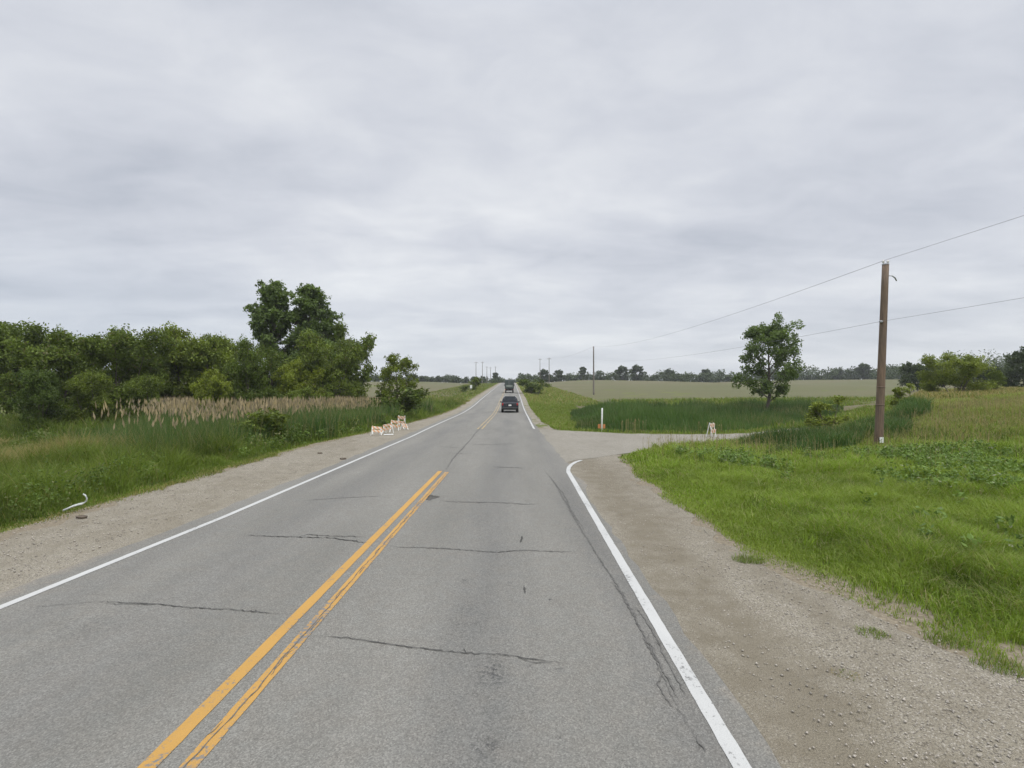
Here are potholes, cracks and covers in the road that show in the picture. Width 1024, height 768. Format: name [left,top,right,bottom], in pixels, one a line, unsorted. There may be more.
crack [55,601,288,614]
crack [183,478,575,768]
crack [547,473,705,750]
